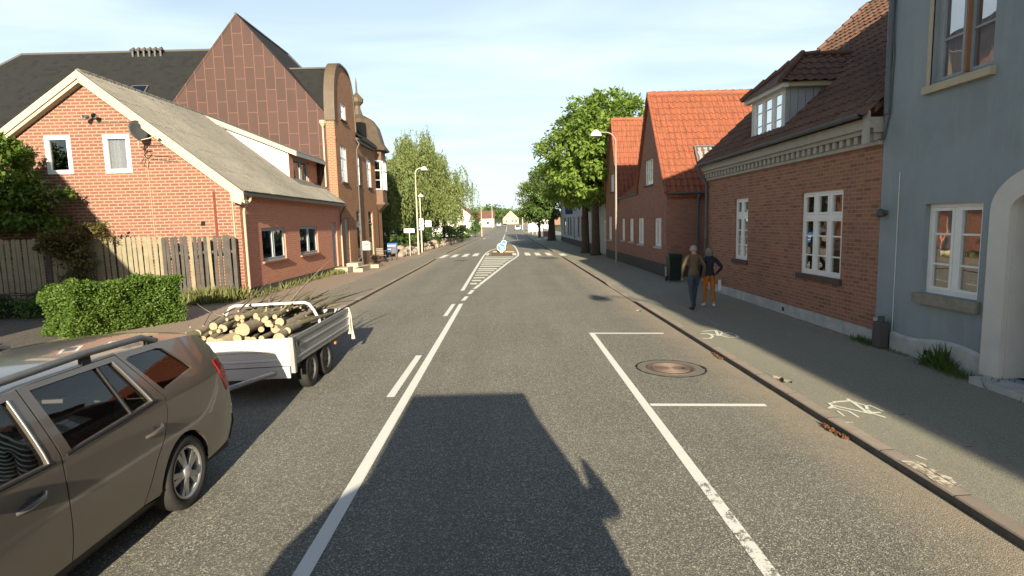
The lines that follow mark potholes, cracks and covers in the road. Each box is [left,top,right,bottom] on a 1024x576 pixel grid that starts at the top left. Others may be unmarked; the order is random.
manhole cover [635,360,707,377]
